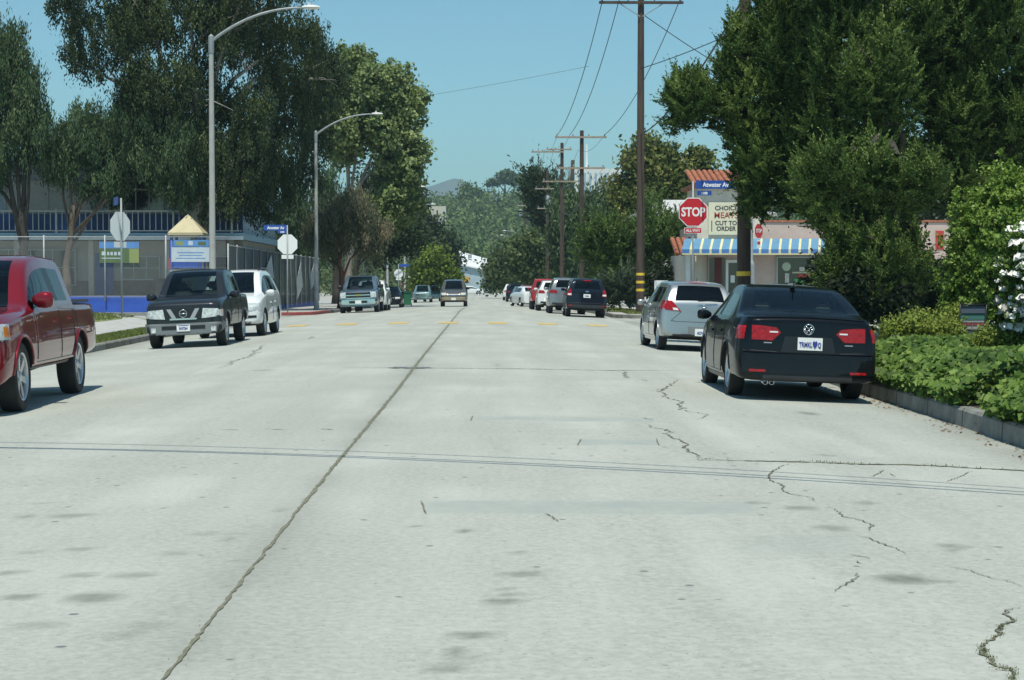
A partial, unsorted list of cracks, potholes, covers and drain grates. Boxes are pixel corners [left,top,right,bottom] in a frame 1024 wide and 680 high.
crack [622,372,708,419]
crack [767,463,904,590]
crack [975,607,1019,680]
crack [646,418,702,458]
